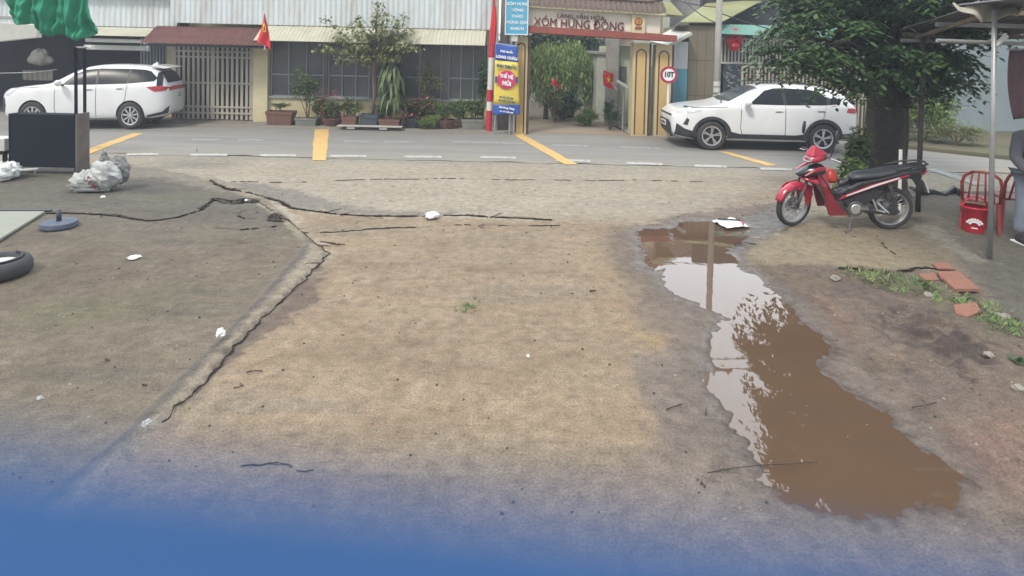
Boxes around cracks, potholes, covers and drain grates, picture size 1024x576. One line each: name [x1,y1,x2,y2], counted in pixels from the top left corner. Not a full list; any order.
crack [46,178,702,422]
crack [241,462,313,472]
crack [838,236,950,272]
